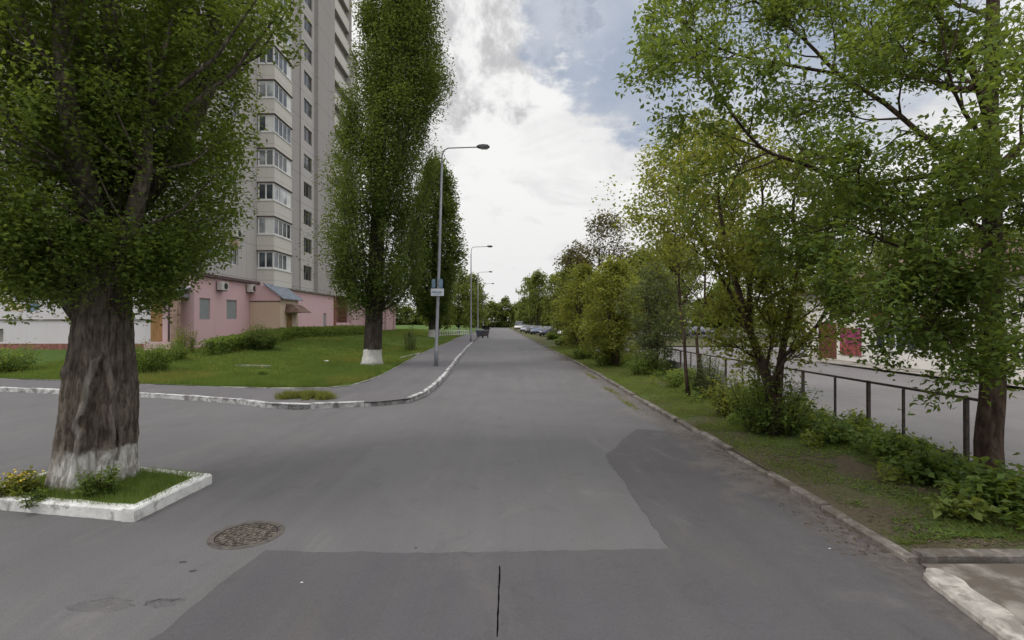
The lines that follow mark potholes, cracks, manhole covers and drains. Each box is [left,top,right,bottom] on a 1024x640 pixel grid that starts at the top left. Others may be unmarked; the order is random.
manhole cover [206,521,285,550]
